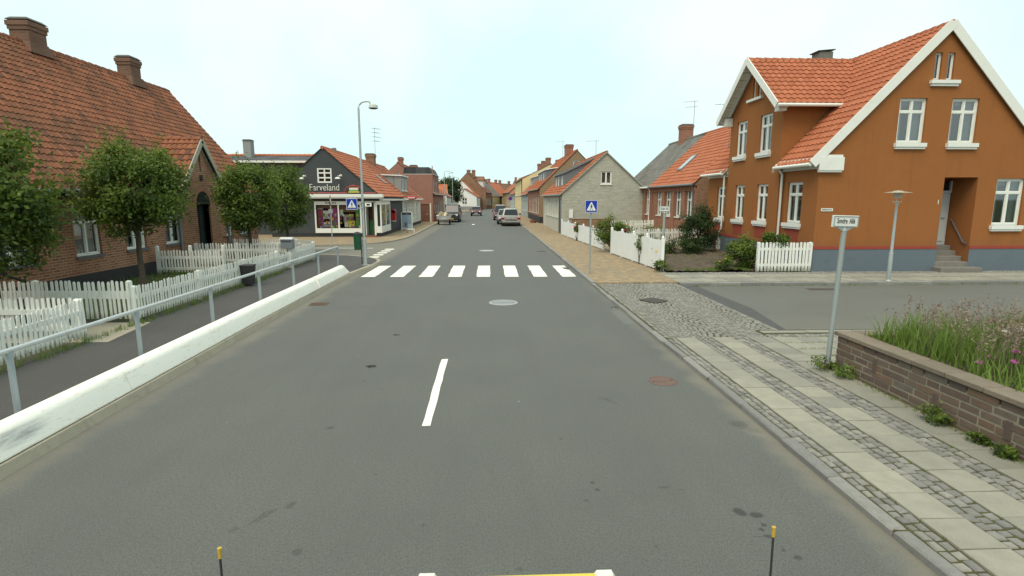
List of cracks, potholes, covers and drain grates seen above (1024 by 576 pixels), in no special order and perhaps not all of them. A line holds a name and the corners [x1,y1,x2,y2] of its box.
manhole cover [648,376,678,386]
